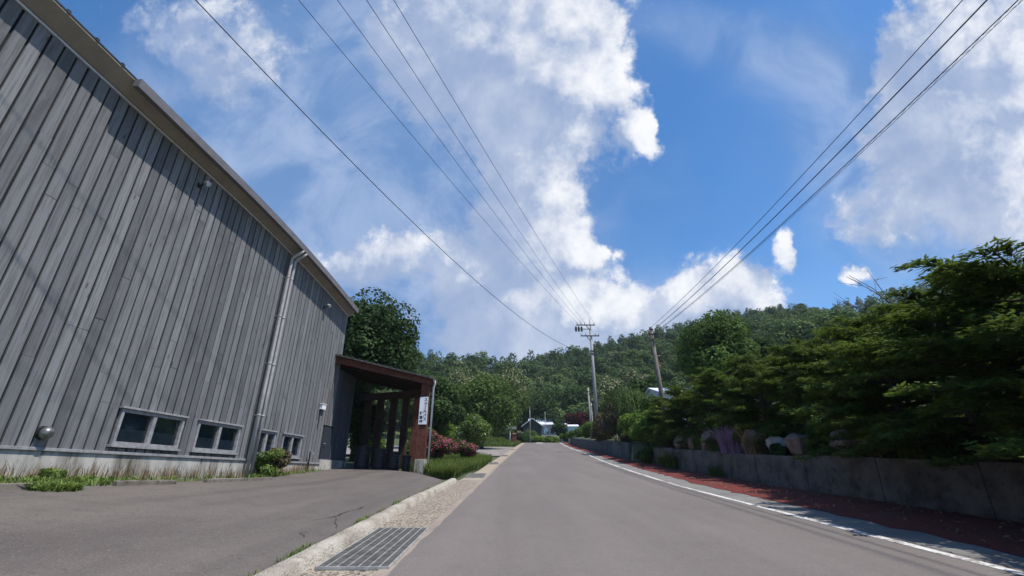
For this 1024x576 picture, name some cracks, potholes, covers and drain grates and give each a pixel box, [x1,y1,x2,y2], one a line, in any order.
drain grate [314,527,429,570]
